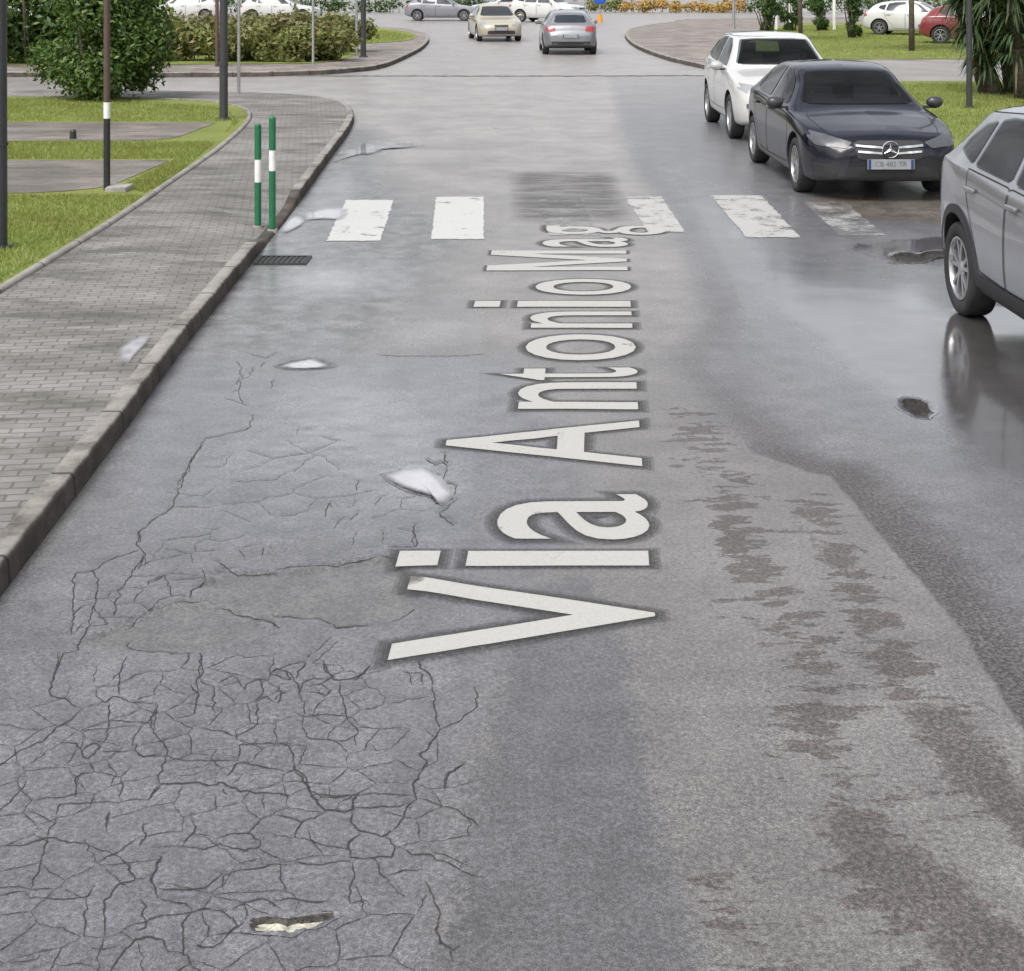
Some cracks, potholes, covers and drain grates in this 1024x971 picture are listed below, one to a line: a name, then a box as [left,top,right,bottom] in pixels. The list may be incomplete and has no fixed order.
pothole [240,911,341,938]
pothole [886,250,944,264]
drain grate [253,255,312,265]
crack [0,353,481,971]
pothole [379,466,457,505]
pothole [894,395,939,419]
pothole [272,356,339,370]
